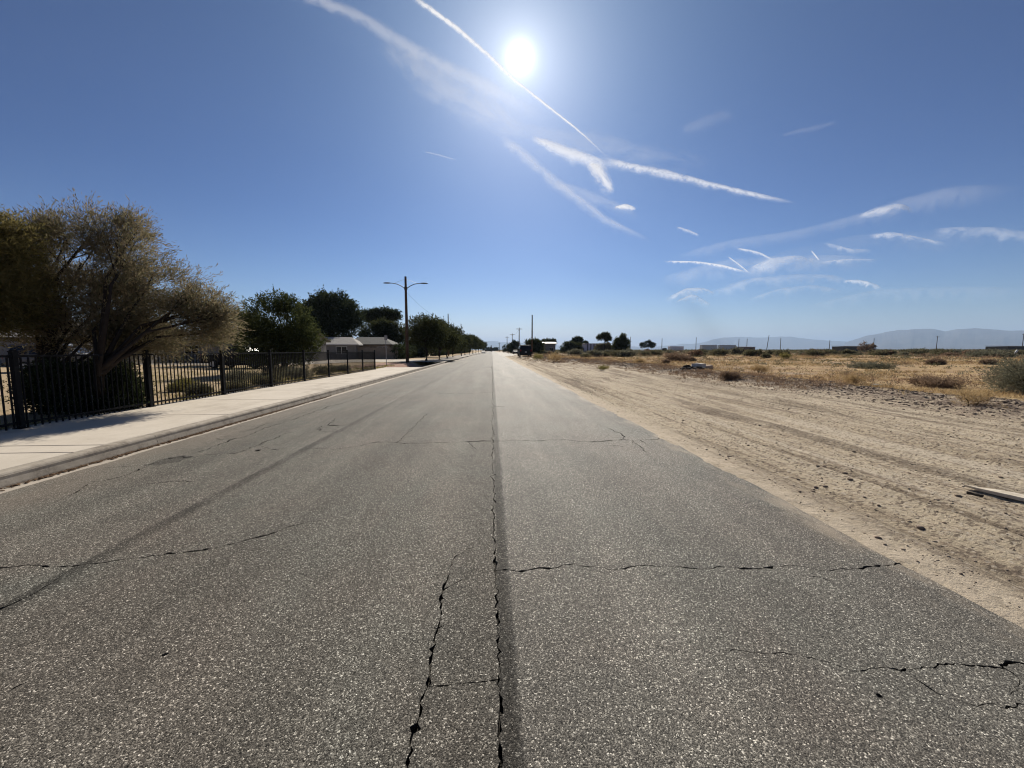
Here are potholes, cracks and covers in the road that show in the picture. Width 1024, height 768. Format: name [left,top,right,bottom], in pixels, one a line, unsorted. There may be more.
crack [190,371,902,768]
crack [0,519,323,610]
crack [726,649,1024,709]
